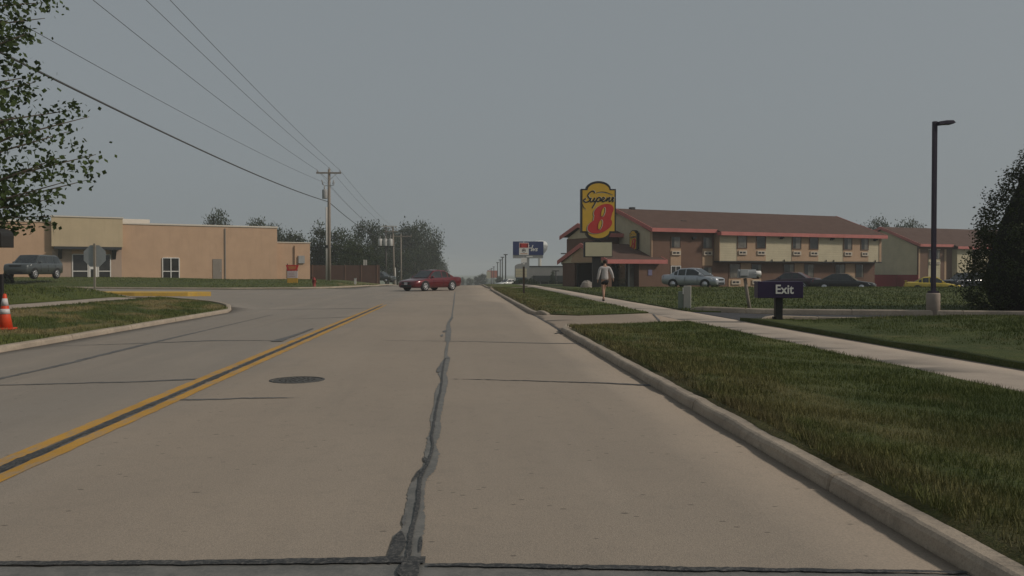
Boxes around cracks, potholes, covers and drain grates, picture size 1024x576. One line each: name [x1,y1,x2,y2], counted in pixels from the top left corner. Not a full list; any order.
manhole cover [269,376,325,384]
